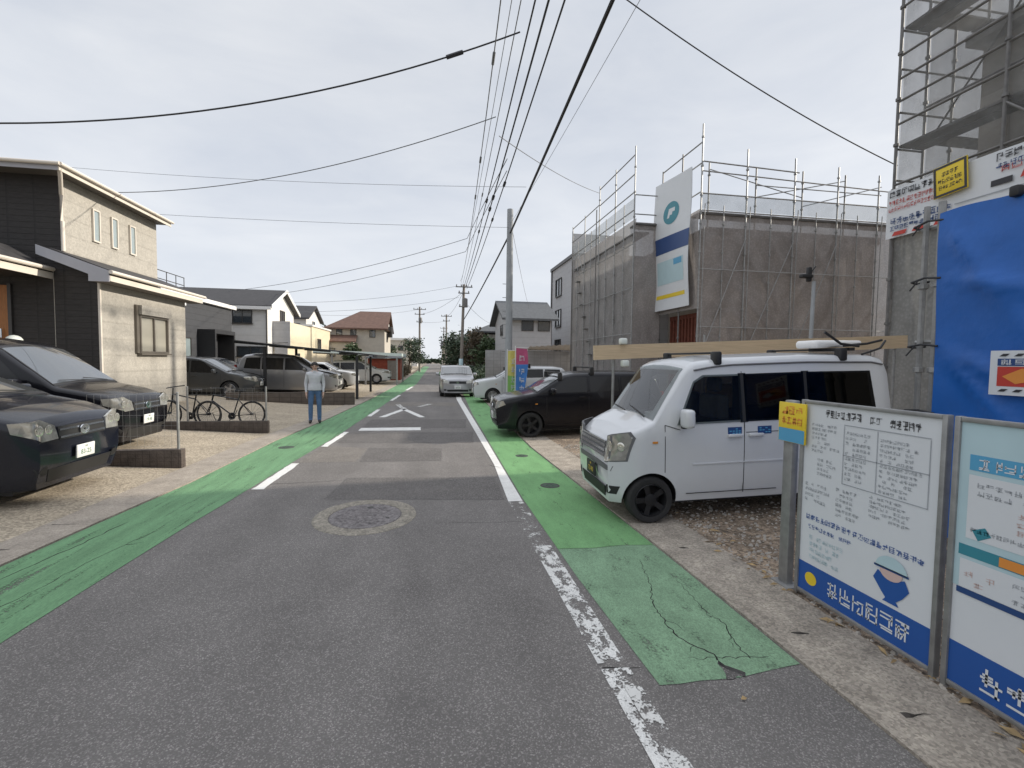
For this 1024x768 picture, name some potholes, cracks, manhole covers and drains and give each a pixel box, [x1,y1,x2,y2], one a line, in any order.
manhole cover [311,500,416,536]
crack [640,561,769,680]
